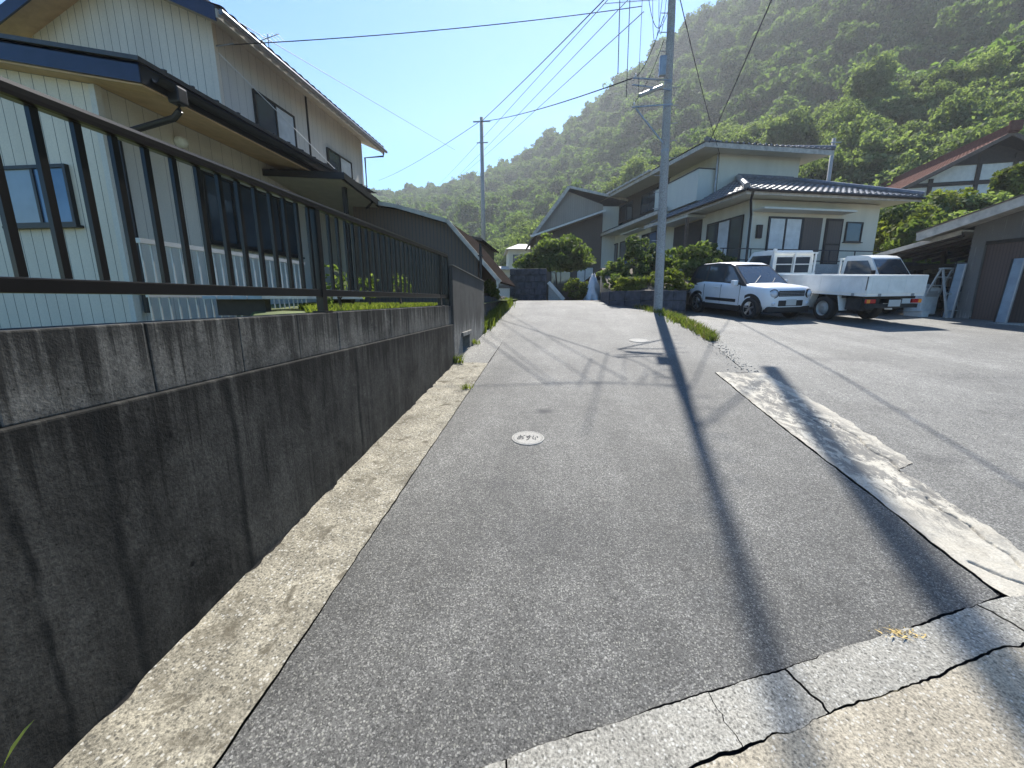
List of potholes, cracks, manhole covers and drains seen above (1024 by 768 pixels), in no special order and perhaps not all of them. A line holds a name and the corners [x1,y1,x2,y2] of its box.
manhole cover [512,431,544,445]
